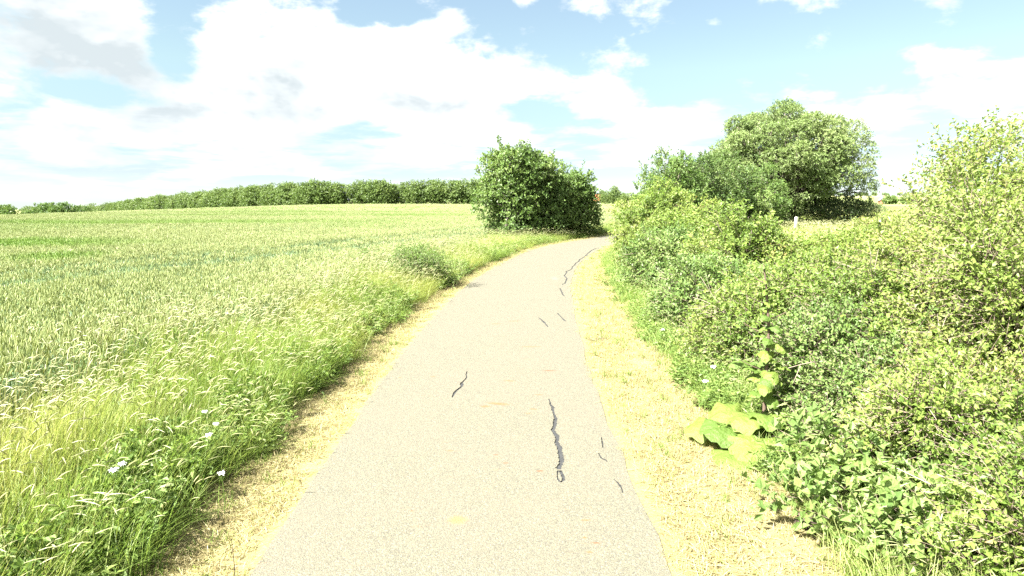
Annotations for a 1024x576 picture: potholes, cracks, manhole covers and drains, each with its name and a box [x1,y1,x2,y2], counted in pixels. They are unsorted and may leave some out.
crack [548,399,565,482]
crack [559,248,596,296]
